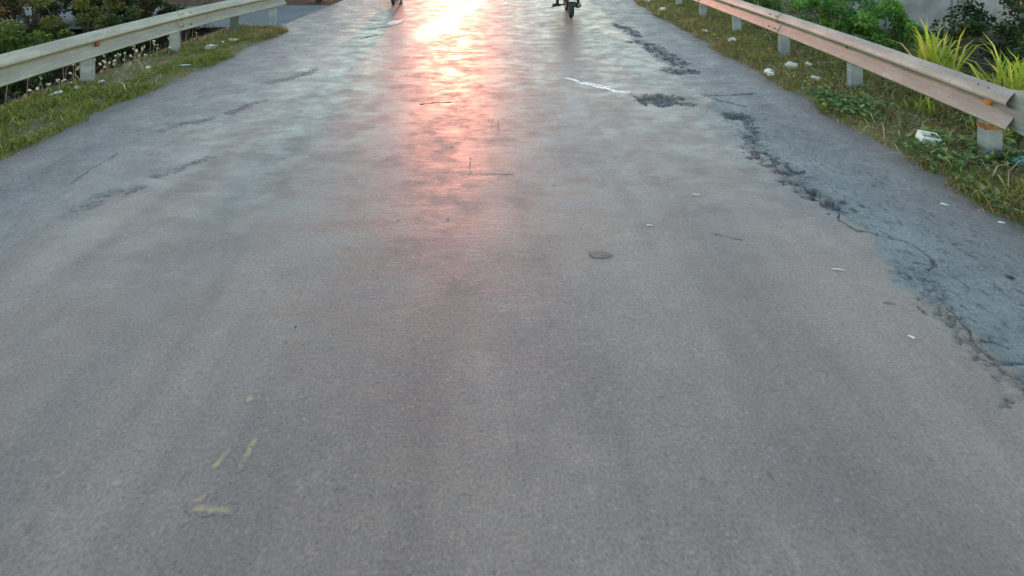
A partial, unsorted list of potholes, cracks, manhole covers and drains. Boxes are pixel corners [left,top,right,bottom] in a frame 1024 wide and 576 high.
pothole [632,93,698,110]
crack [68,153,118,184]
crack [700,93,754,107]
crack [836,212,941,272]
crack [459,158,513,176]
